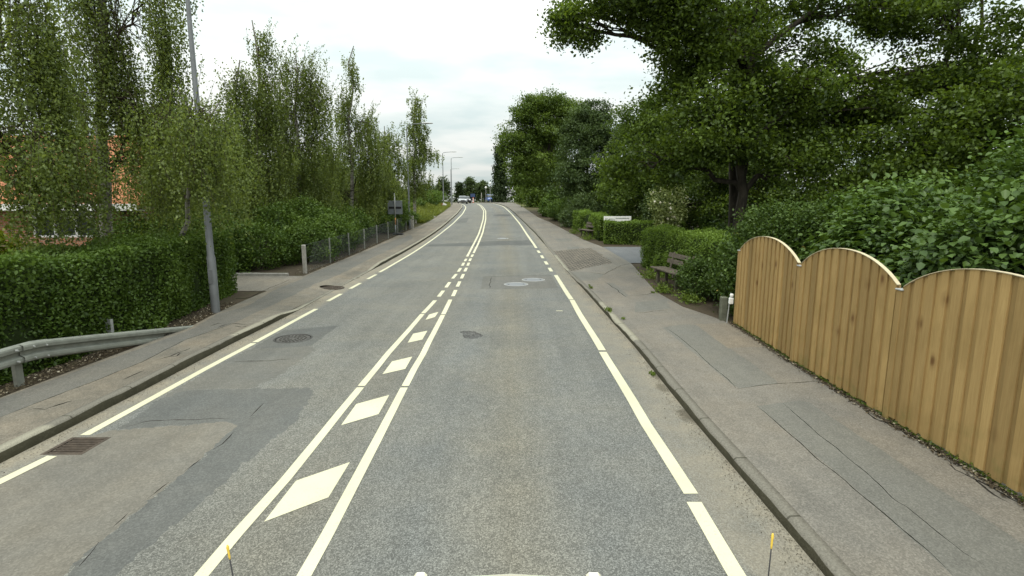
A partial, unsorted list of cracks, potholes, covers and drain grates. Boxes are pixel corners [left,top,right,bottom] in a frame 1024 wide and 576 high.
crack [863,409,1021,504]
pothole [460,331,483,339]
drain grate [40,437,111,455]
manhole cover [273,334,313,343]
crack [783,403,977,561]
